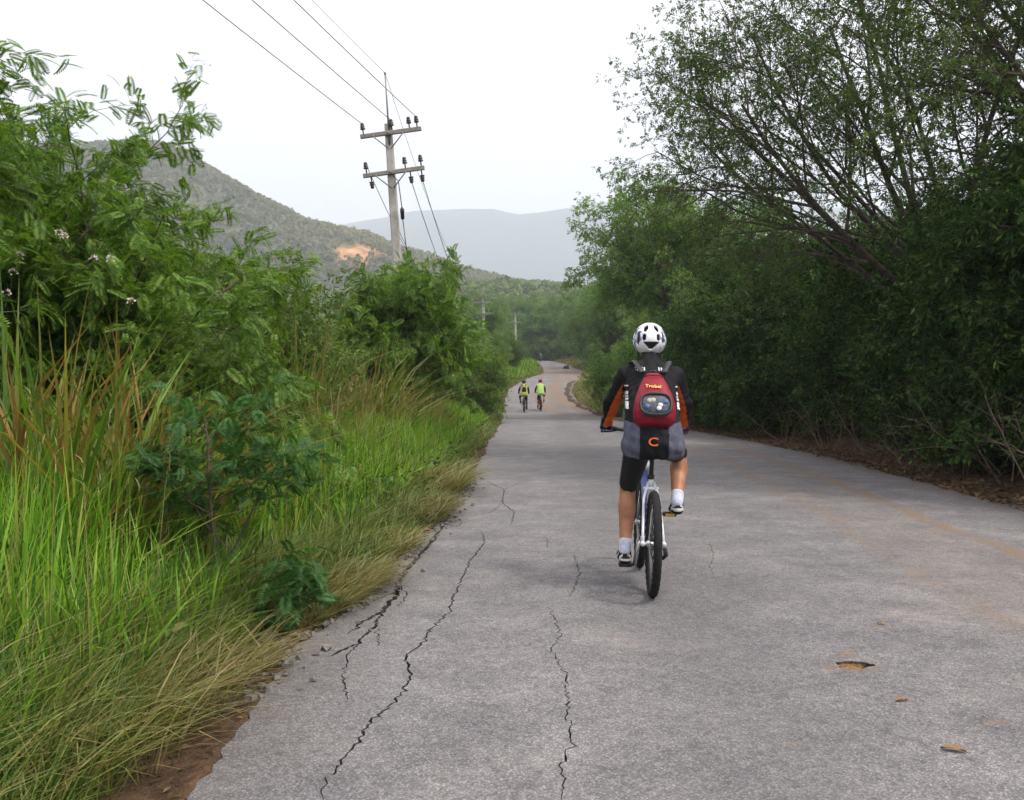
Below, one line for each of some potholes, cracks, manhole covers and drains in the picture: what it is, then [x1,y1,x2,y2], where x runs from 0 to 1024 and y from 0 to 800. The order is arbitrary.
pothole [835,661,875,670]
crack [320,533,486,800]
crack [549,609,575,799]
